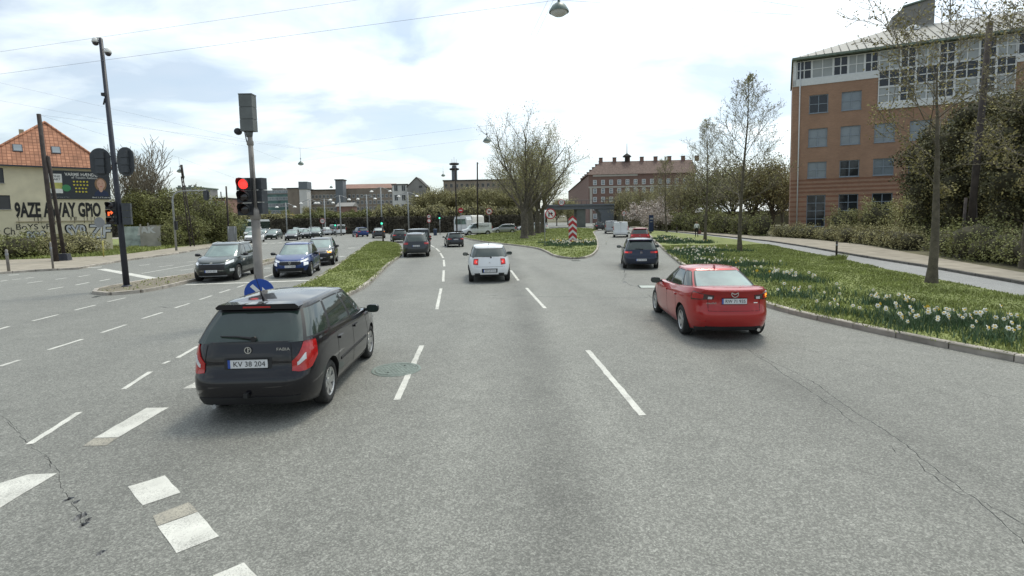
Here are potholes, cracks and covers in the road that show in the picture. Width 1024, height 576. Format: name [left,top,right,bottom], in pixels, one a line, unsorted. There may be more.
crack [742,345,1024,544]
manhole cover [371,362,421,377]
crack [2,416,84,526]
